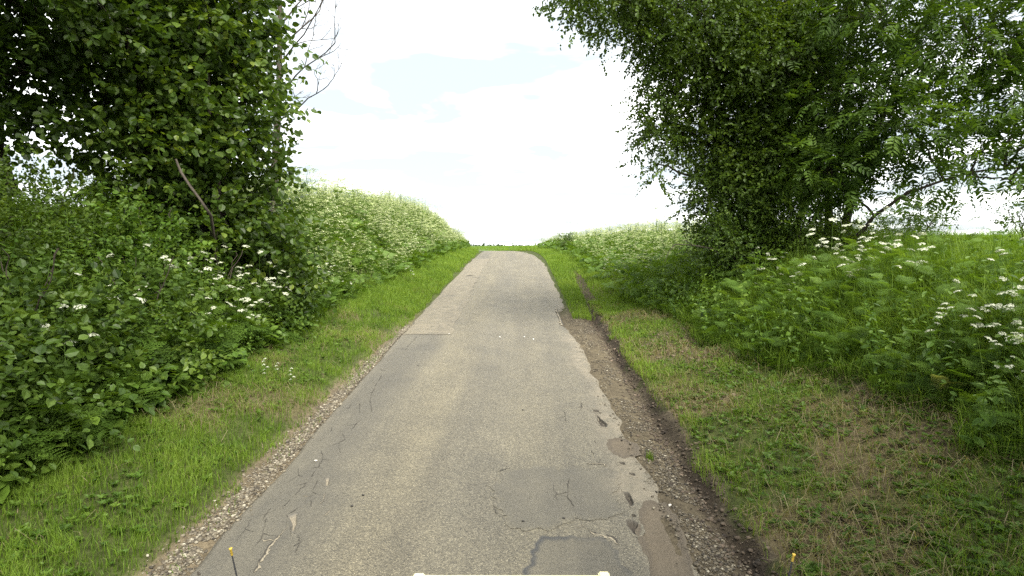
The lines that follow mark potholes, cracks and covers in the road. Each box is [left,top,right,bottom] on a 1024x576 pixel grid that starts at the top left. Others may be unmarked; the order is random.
pothole [622,517,646,538]
pothole [594,414,609,429]
pothole [621,489,637,508]
crack [237,375,382,572]
crack [577,525,620,545]
